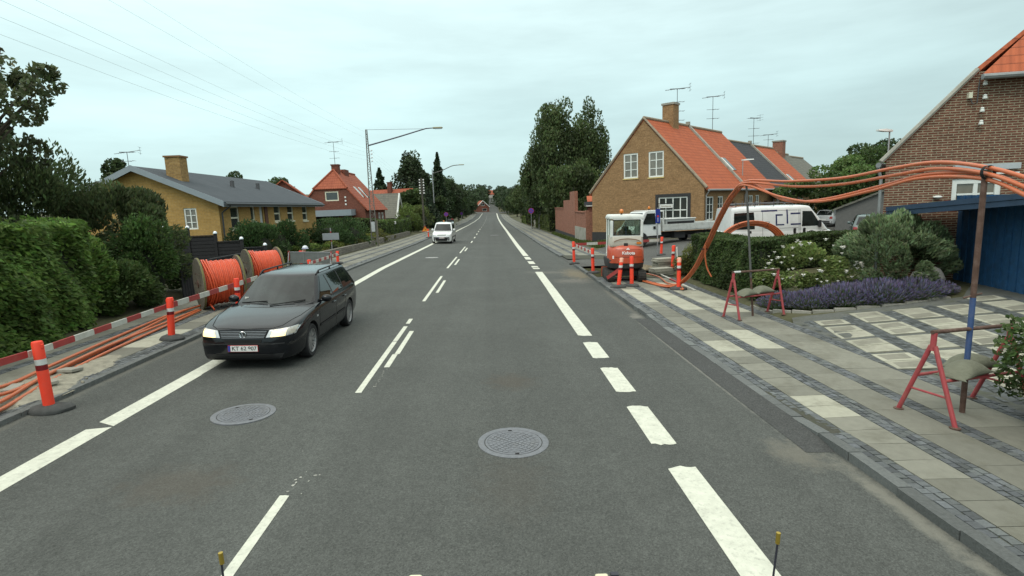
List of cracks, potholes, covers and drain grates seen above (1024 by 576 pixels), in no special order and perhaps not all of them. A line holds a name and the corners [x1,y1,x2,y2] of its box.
manhole cover [210,403,276,426]
manhole cover [478,427,549,458]
